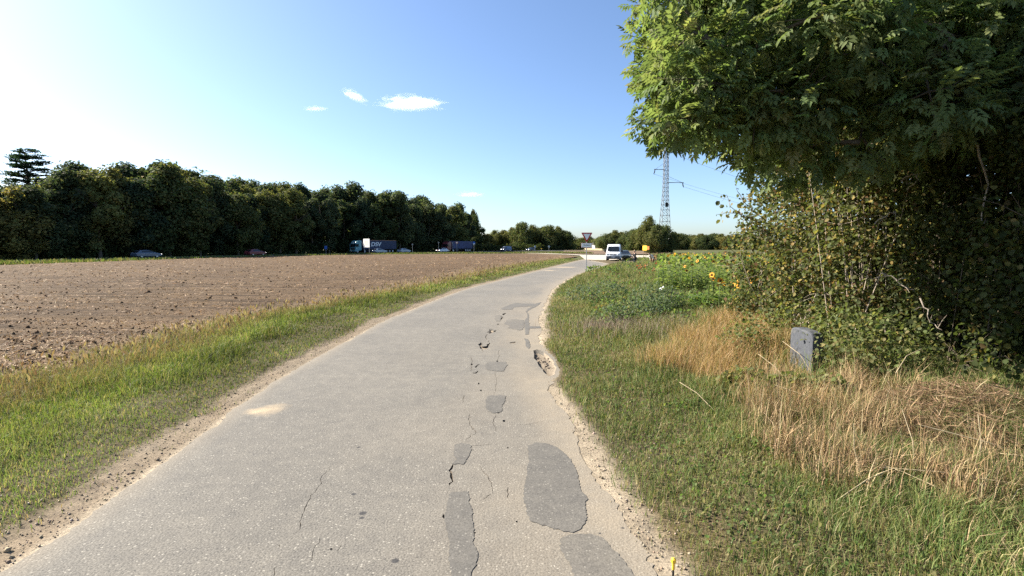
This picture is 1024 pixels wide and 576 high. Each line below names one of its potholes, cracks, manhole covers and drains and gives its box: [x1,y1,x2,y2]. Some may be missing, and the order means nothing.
pothole [533,349,556,376]
crack [274,468,330,575]
